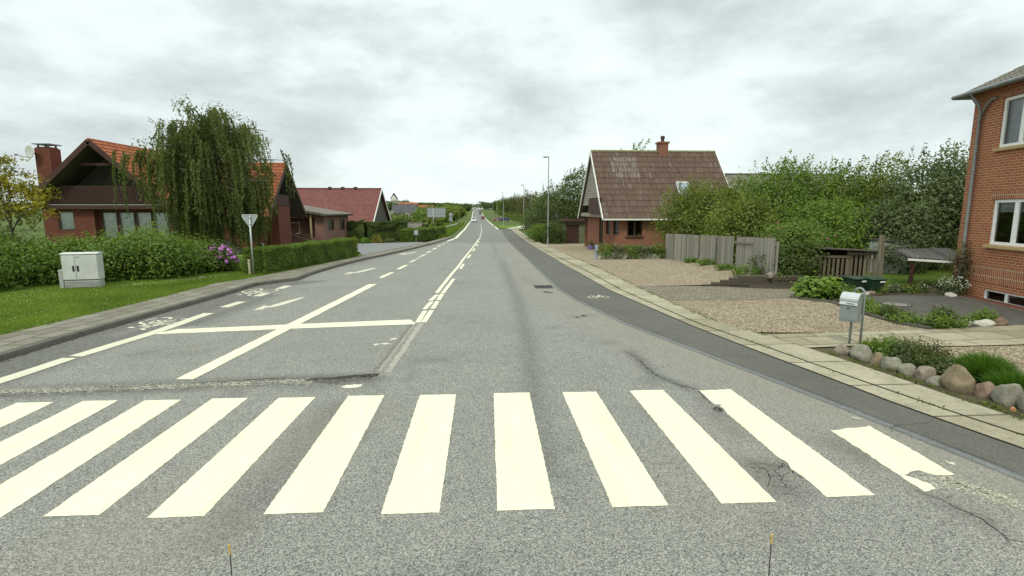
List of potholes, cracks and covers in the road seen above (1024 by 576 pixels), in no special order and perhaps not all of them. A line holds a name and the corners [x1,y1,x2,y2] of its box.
crack [624,351,713,405]
crack [740,458,803,497]
crack [914,489,1023,544]
